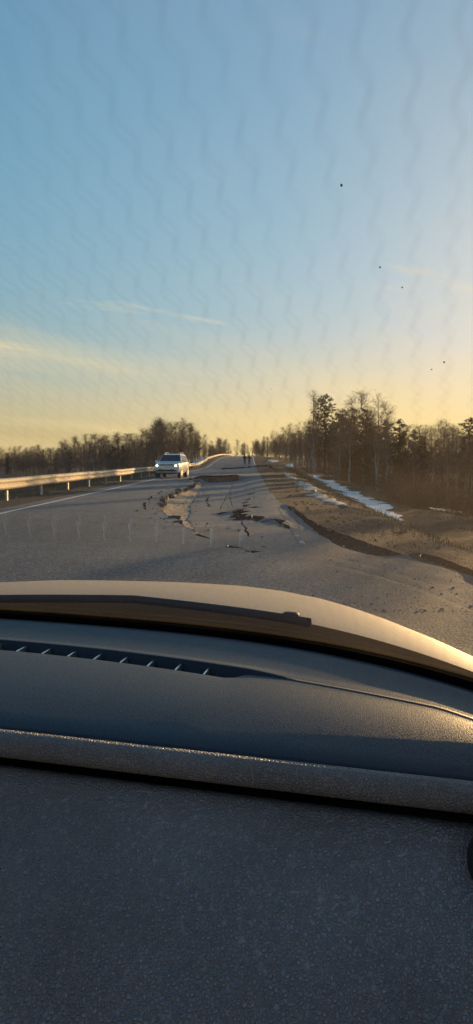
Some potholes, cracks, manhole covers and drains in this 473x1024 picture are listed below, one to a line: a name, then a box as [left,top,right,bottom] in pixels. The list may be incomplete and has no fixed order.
crack [183,465,402,556]
pothole [157,480,202,532]
crack [420,553,473,576]
